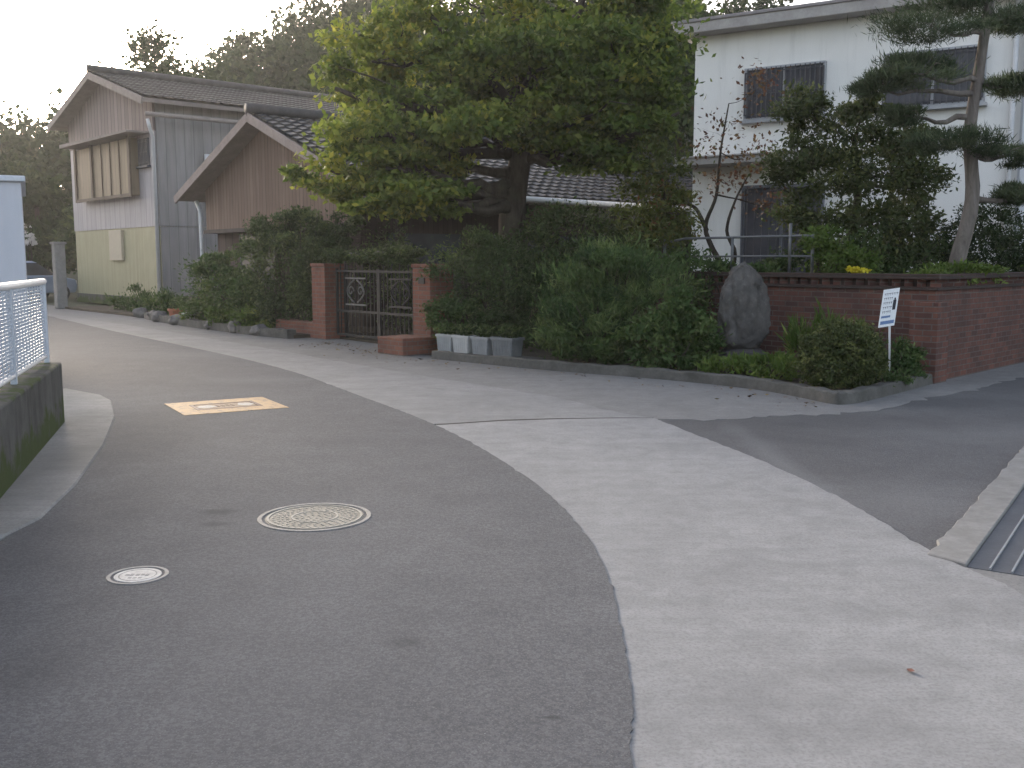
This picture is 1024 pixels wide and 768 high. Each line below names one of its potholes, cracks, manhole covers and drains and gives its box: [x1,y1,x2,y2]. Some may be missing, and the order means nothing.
manhole cover [106,566,169,585]
manhole cover [165,397,289,416]
manhole cover [257,503,371,532]
